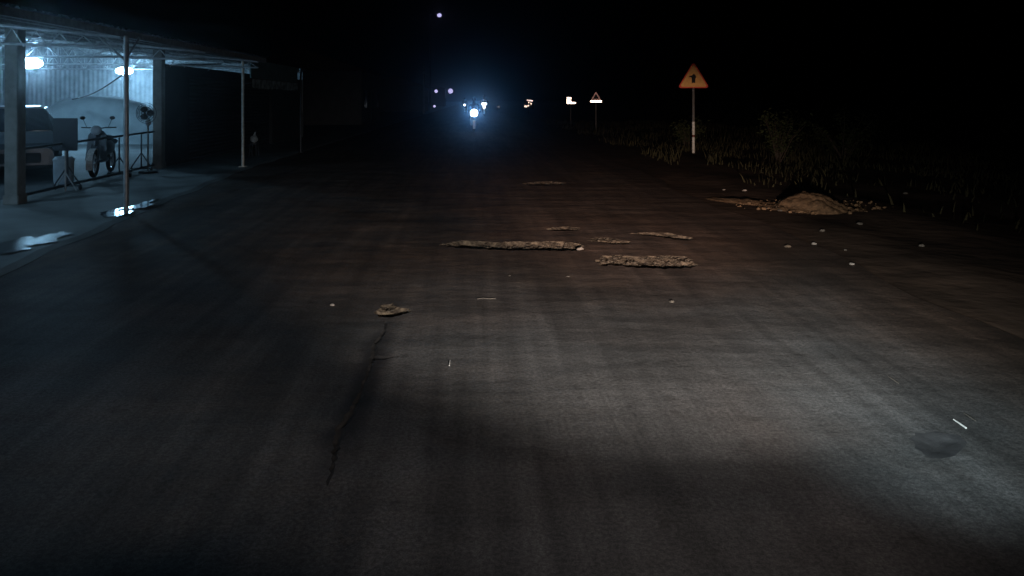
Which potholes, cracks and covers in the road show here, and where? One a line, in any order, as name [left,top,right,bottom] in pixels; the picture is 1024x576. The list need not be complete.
pothole [374,303,411,318]
pothole [440,240,585,251]
pothole [595,255,699,269]
crack [326,321,399,486]
pothole [629,232,693,240]
pothole [909,431,967,459]
